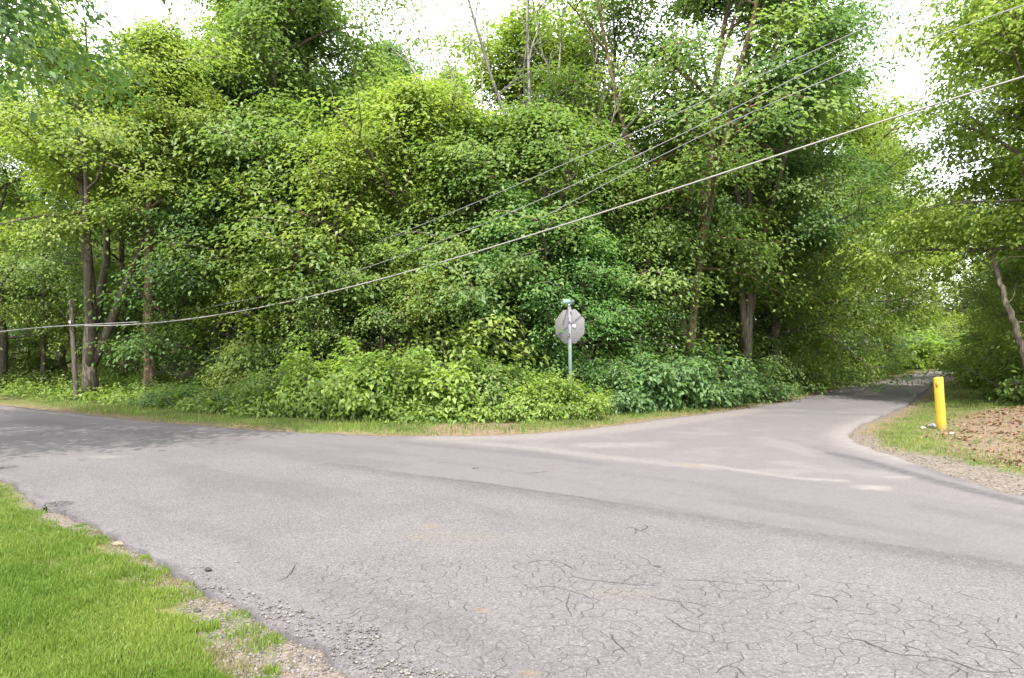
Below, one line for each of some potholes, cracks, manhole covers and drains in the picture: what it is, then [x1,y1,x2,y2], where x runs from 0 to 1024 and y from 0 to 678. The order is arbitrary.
pothole [42,501,76,510]
crack [289,553,513,678]
crack [501,545,1024,678]
